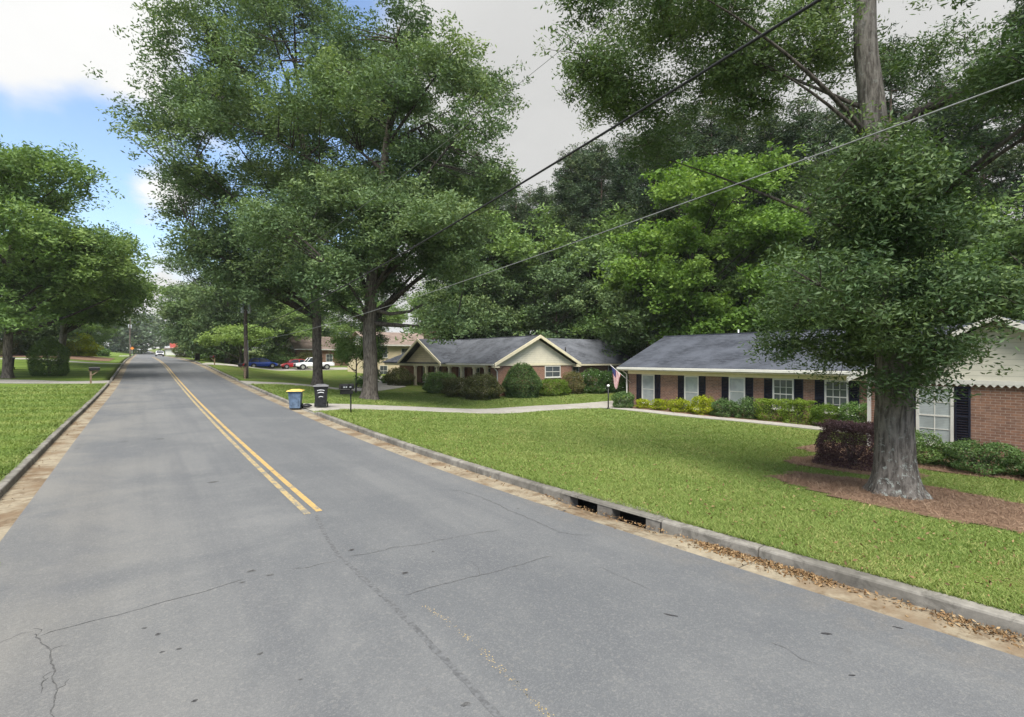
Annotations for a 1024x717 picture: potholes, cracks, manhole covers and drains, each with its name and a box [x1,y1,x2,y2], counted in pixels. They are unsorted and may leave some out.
drain grate [546,490,668,536]
crack [408,556,549,595]
crack [1,580,239,717]
